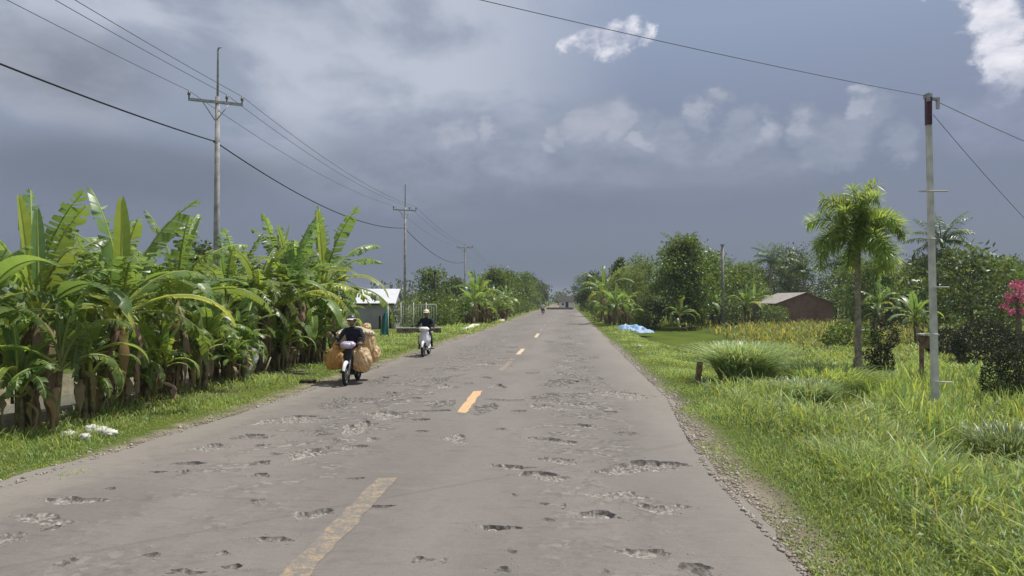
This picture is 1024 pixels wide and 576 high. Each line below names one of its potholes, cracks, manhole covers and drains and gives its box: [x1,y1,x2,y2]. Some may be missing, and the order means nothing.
pothole [534,457,586,465]
pothole [442,434,467,446]
pothole [609,548,673,559]
pothole [292,508,334,519]
pothole [519,471,572,482]
pothole [566,510,627,519]
pothole [288,446,330,461]
pothole [525,437,582,445]
pothole [13,513,81,526]
pothole [587,460,691,475]
pothole [41,496,110,505]
